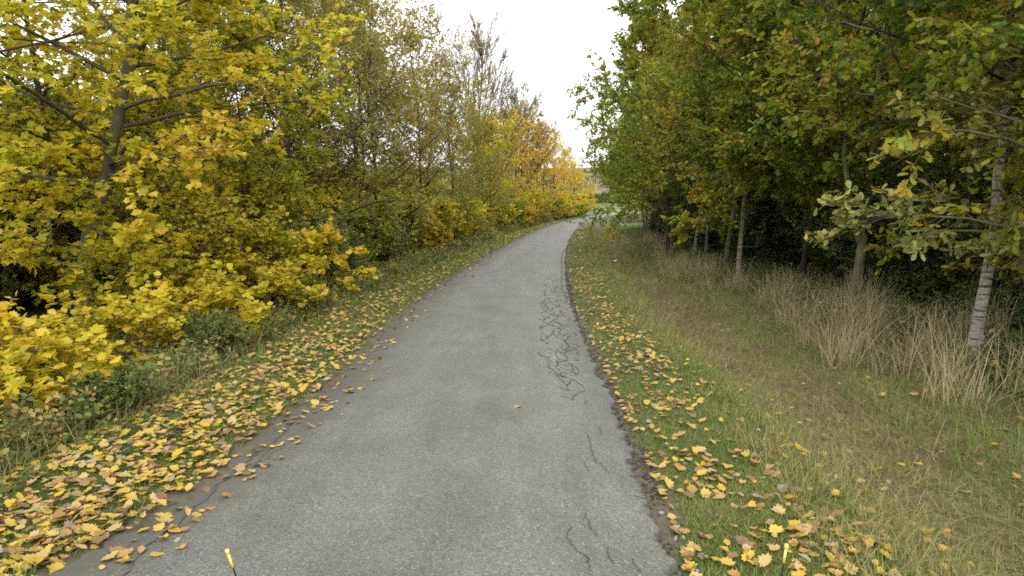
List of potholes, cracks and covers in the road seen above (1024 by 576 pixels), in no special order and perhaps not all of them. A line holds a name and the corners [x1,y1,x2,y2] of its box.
crack [566,513,615,570]
crack [121,422,292,576]
crack [538,250,587,401]
